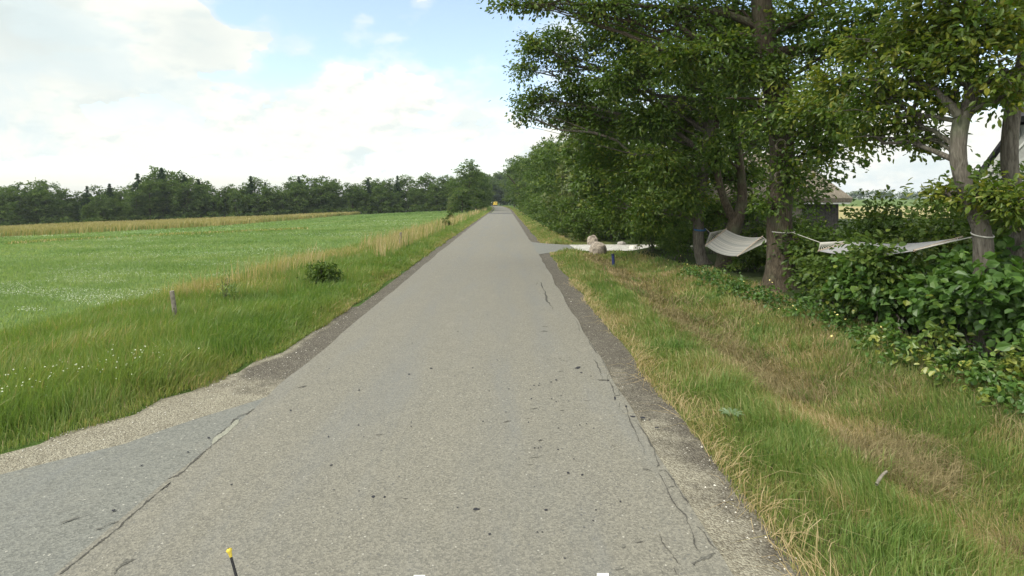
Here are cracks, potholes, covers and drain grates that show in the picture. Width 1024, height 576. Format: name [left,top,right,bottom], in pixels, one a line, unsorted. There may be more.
crack [577,323,720,574]
